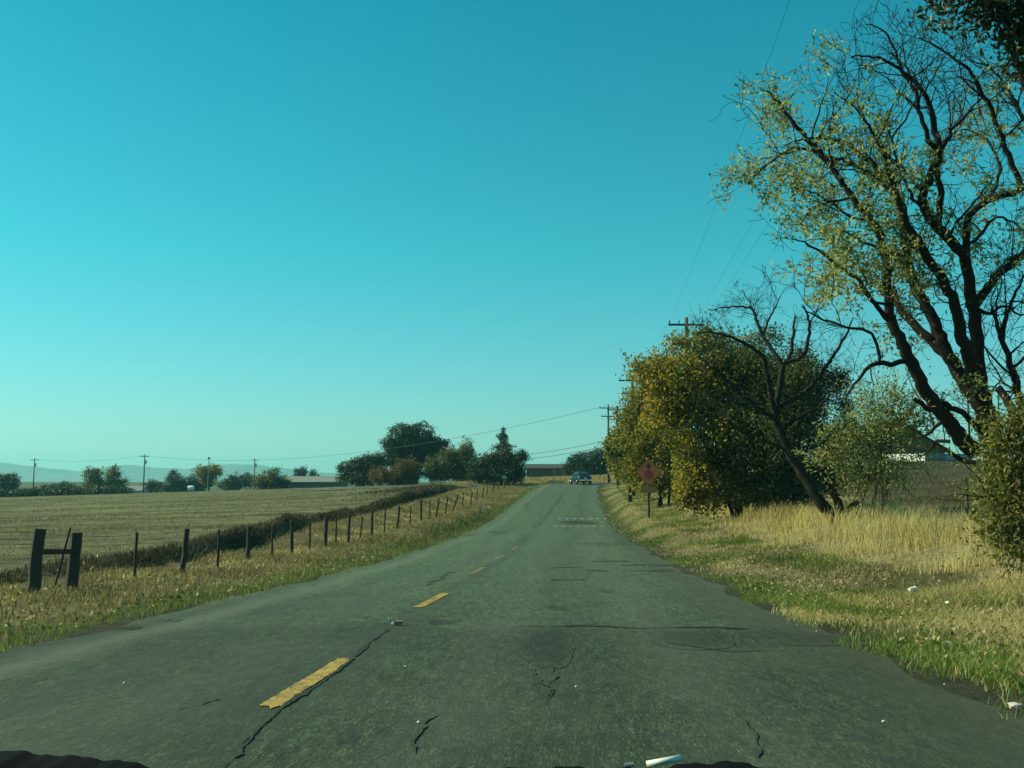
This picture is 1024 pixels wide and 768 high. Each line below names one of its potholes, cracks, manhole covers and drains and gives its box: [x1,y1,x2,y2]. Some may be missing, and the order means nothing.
crack [735,711,762,757]
crack [550,560,673,580]
crack [425,571,456,585]
crack [410,713,438,754]
crack [178,626,394,768]
